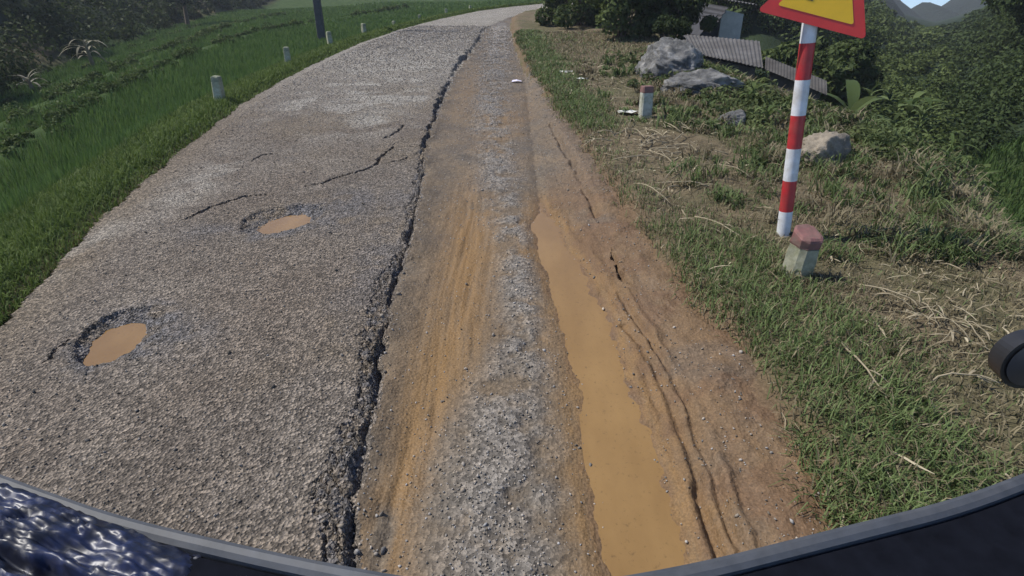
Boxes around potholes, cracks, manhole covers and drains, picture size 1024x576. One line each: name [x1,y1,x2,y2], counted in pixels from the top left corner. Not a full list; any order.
pothole [76,304,170,366]
pothole [240,203,326,235]
crack [184,193,275,221]
crack [304,26,492,569]
